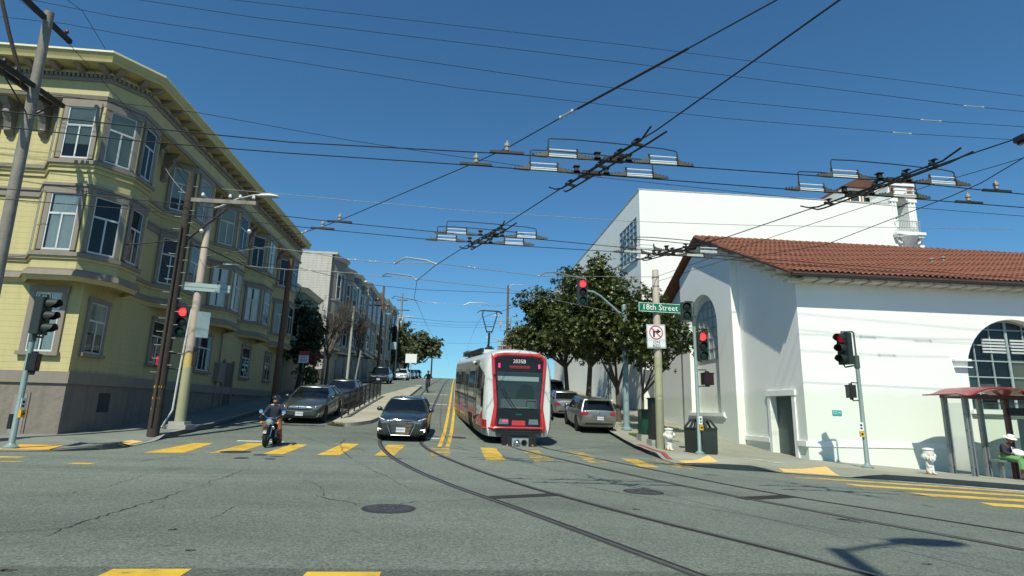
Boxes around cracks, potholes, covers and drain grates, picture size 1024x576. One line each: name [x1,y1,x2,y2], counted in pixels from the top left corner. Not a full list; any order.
crack [0,468,249,535]
manhole cover [361,504,416,514]
